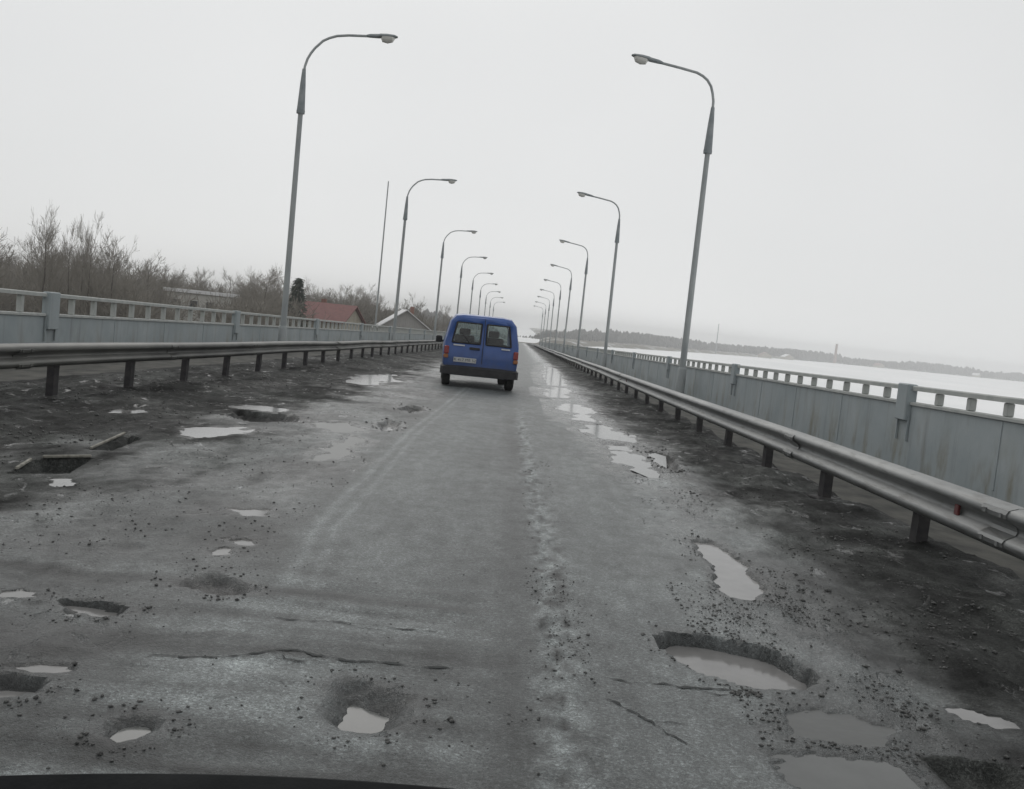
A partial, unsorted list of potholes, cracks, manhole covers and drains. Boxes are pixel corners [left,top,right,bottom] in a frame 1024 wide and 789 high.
crack [148,648,450,668]
crack [274,616,435,632]
pothole [56,598,134,617]
pothole [314,676,419,736]
pothole [652,631,821,691]
pothole [226,410,302,422]
pothole [90,711,167,745]
pothole [170,570,257,596]
pothole [0,670,48,699]
crack [607,678,735,746]
pothole [688,538,770,601]
